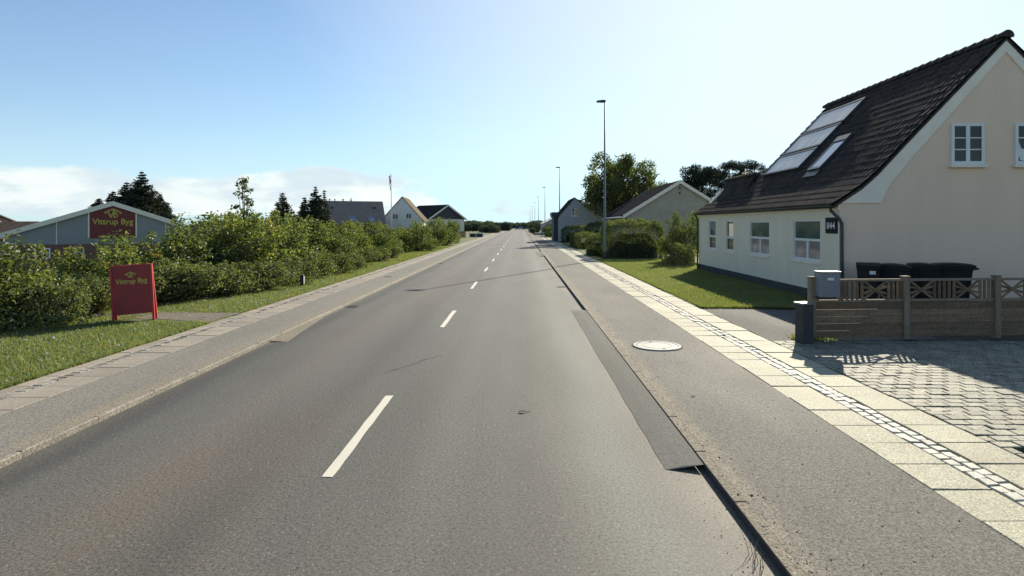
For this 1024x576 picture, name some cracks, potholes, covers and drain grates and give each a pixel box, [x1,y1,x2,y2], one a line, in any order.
manhole cover [631,341,683,352]
